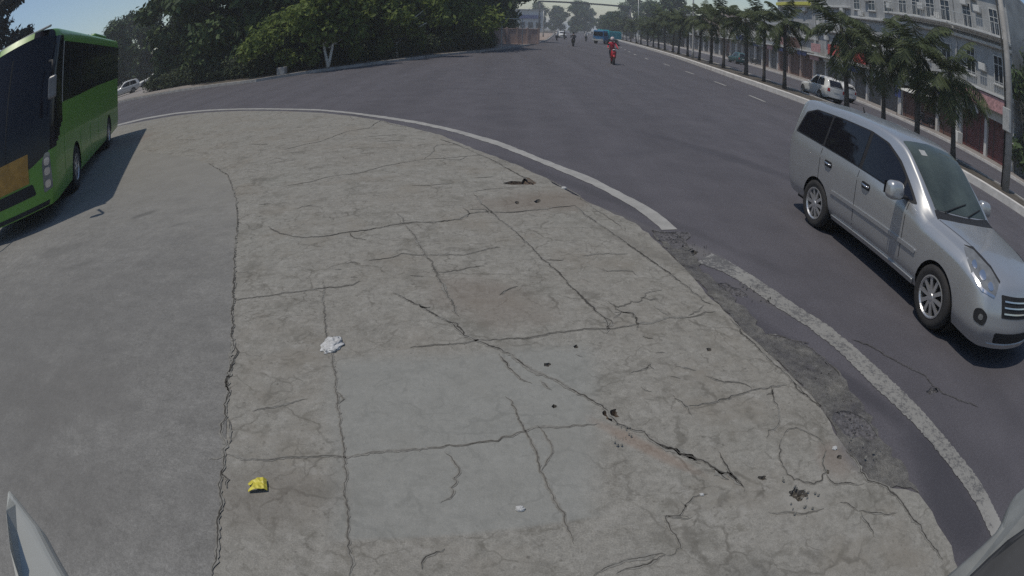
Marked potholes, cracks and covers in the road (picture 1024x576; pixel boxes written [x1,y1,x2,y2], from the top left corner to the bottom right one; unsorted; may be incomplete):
pothole [504,177,536,185]
crack [268,116,978,576]
crack [209,144,267,574]
